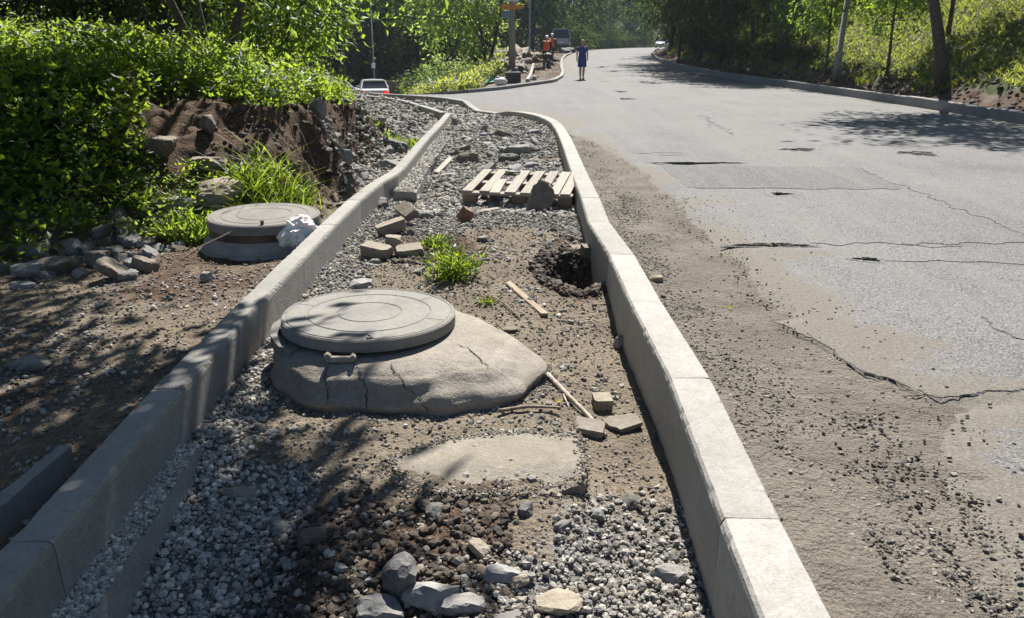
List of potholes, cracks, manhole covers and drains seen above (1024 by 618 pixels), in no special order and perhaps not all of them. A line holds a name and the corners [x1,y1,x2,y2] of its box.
pothole [846,256,886,264]
manhole cover [280,289,455,353]
manhole cover [206,203,321,236]
crack [761,299,1024,398]
crack [817,242,1024,265]
pothole [889,150,944,158]
